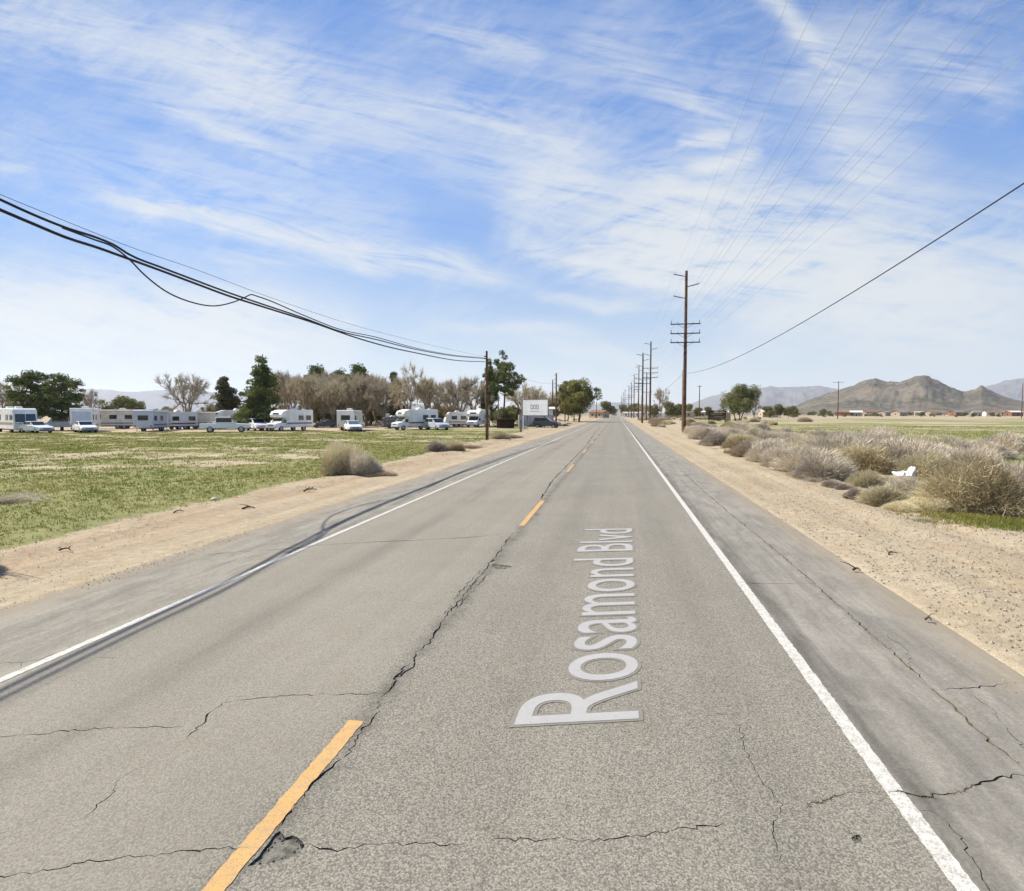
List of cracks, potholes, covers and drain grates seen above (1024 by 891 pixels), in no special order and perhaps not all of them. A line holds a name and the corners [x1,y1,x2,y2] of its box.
crack [806,774,1024,891]
crack [739,728,789,874]
crack [885,634,1024,748]
pothole [248,831,304,866]
crack [0,846,237,878]
crack [2,427,600,829]
crack [300,824,721,852]
